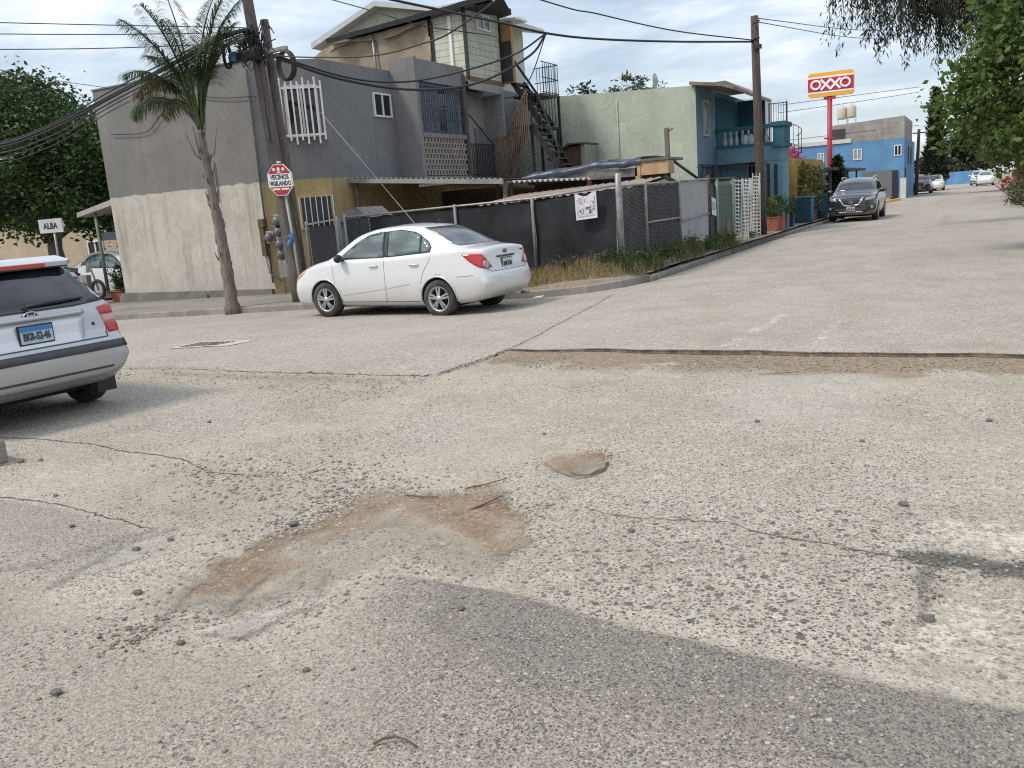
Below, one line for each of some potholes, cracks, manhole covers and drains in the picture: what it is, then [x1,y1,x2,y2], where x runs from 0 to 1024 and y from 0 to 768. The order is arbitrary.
crack [0,497,152,529]
pothole [545,452,603,478]
crack [593,509,897,557]
